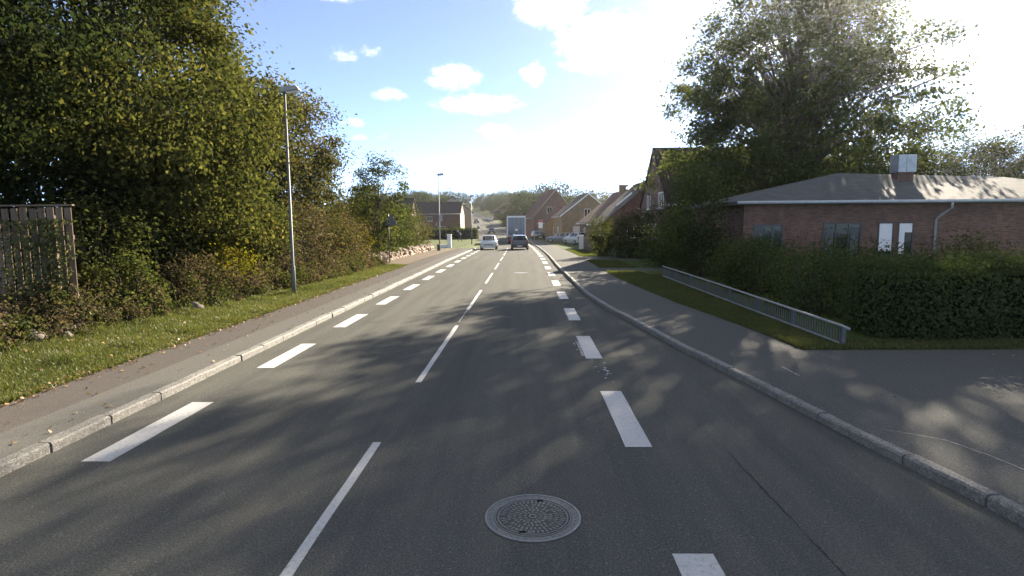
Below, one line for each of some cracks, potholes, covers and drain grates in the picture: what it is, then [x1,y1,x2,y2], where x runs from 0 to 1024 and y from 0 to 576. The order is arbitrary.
crack [731,455,846,576]
manhole cover [485,494,581,543]
crack [883,429,1024,470]
